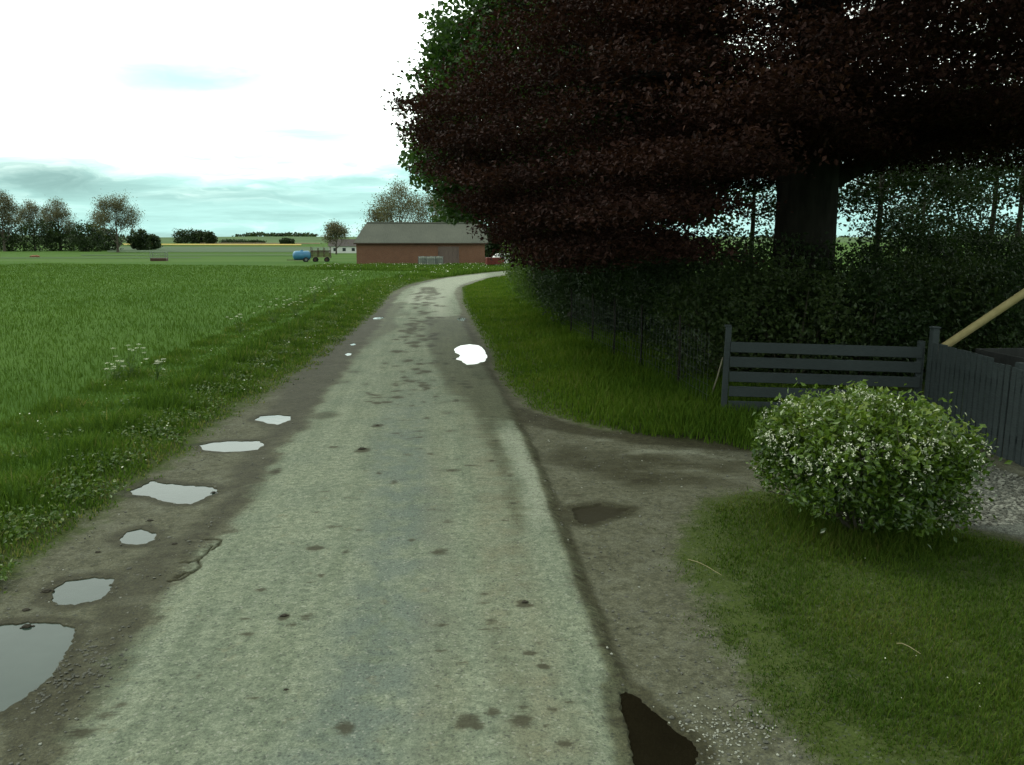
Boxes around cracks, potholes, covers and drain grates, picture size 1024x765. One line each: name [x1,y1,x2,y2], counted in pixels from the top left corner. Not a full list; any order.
pothole [617,688,700,765]
pothole [129,480,221,504]
pothole [199,440,264,452]
pothole [0,621,77,712]
pothole [454,344,487,365]
pothole [254,414,291,425]
pothole [51,577,115,605]
pothole [572,503,630,524]
pothole [119,528,157,545]
